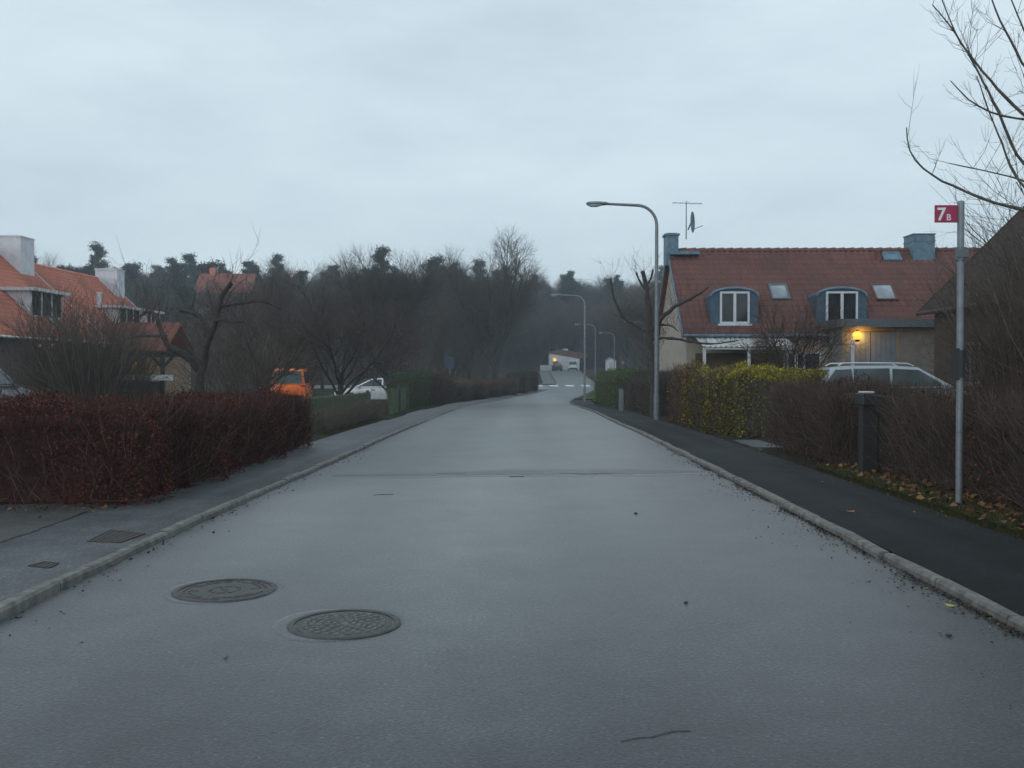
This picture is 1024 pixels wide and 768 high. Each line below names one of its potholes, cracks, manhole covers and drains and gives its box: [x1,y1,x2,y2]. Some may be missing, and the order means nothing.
manhole cover [161,578,281,605]
crack [622,730,691,742]
manhole cover [271,609,401,643]
